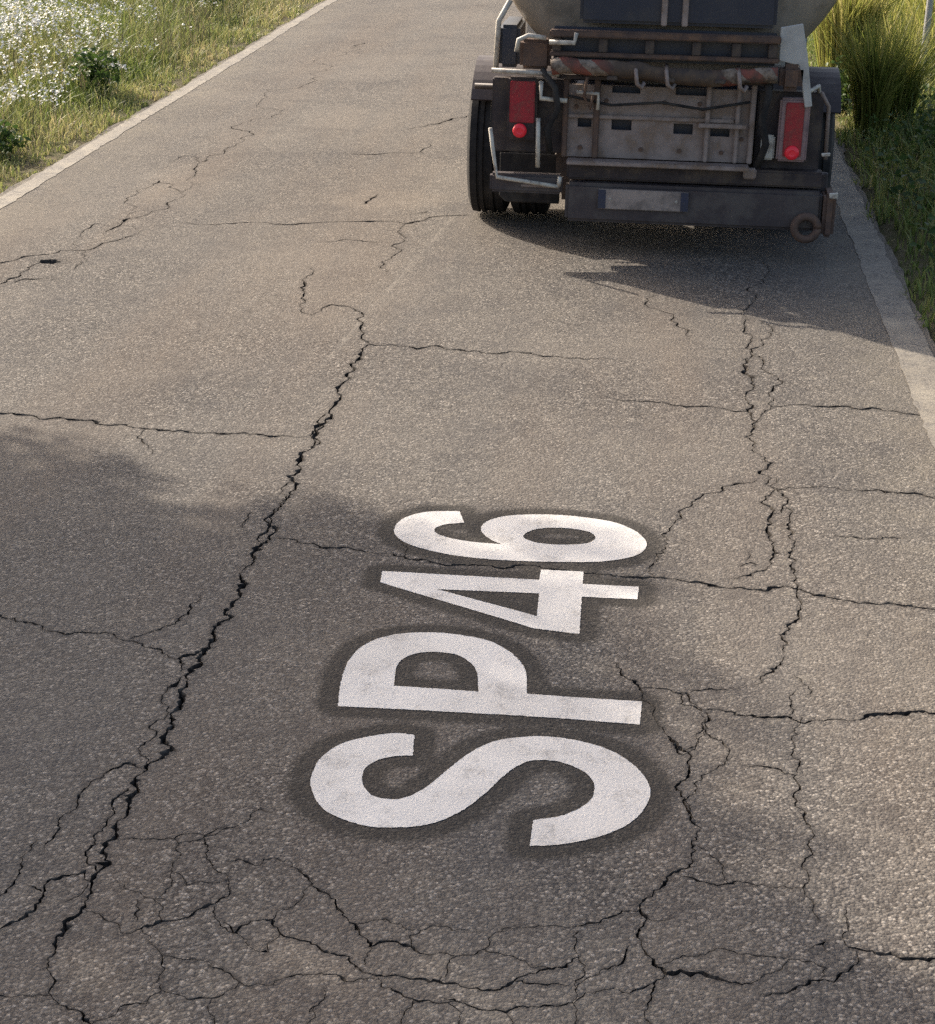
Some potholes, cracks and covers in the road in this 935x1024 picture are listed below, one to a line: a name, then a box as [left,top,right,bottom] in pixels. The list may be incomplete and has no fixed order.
crack [0,43,365,284]
crack [0,260,935,1024]
crack [191,212,462,270]
